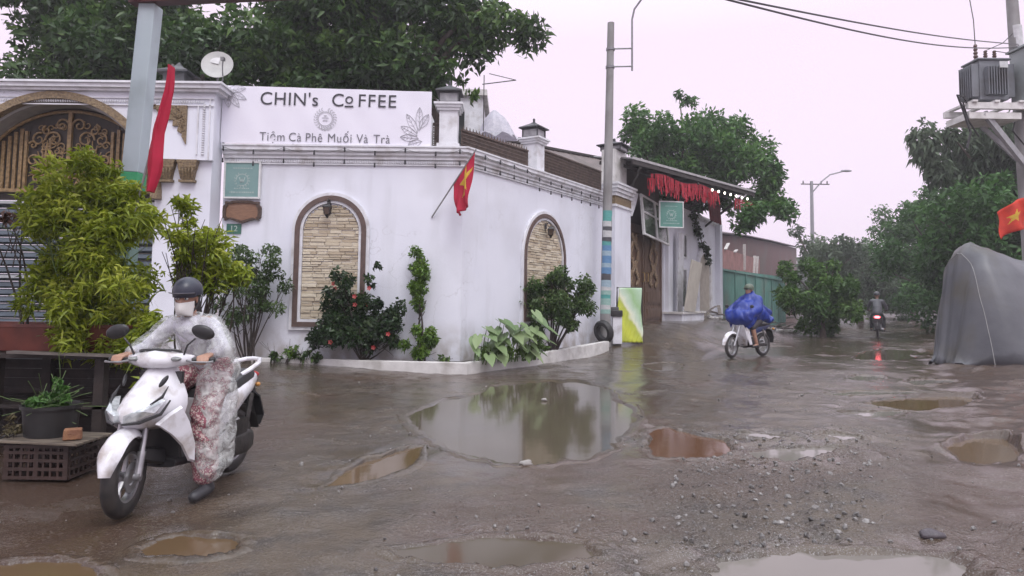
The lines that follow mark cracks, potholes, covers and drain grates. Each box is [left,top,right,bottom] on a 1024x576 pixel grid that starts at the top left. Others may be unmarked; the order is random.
pothole [684,542,1020,576]
pothole [636,425,746,461]
pothole [857,391,991,412]
pothole [317,444,428,490]
pothole [120,529,258,565]
pothole [372,529,623,574]
pothole [396,379,648,469]
pothole [734,443,857,465]
pothole [0,552,121,576]
pothole [932,428,1024,465]
